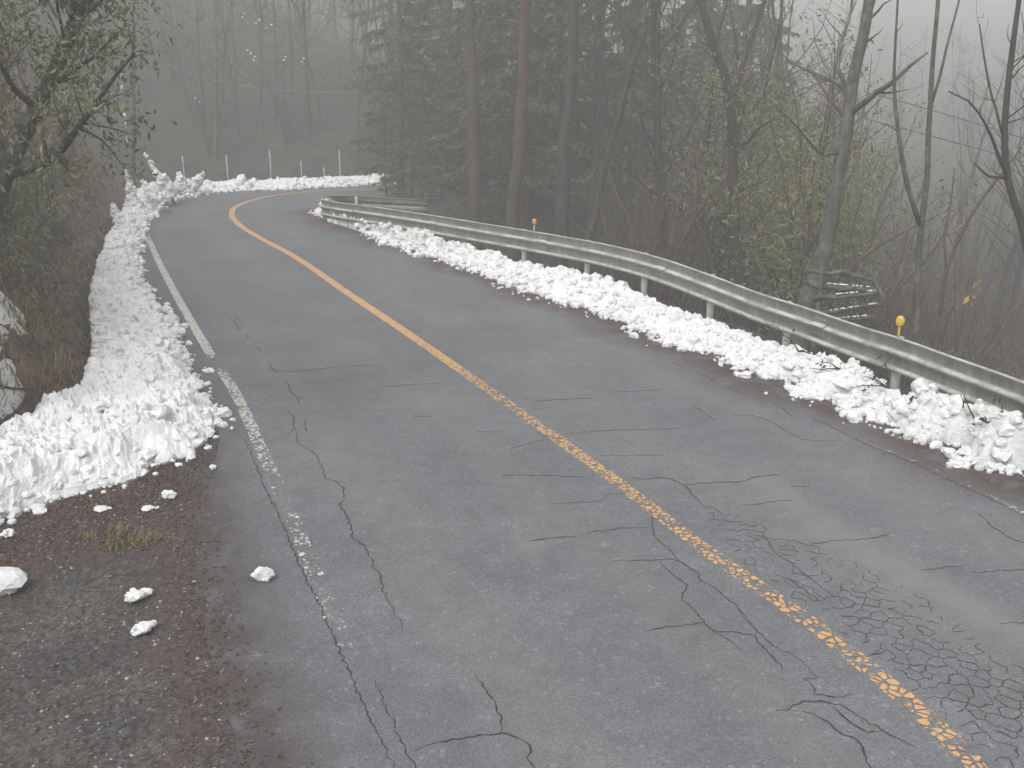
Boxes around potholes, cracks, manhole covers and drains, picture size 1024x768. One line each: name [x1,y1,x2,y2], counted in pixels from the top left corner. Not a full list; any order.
crack [590,518,911,768]
crack [413,675,535,768]
crack [288,384,403,632]
crack [635,474,775,505]
crack [708,507,1024,768]
